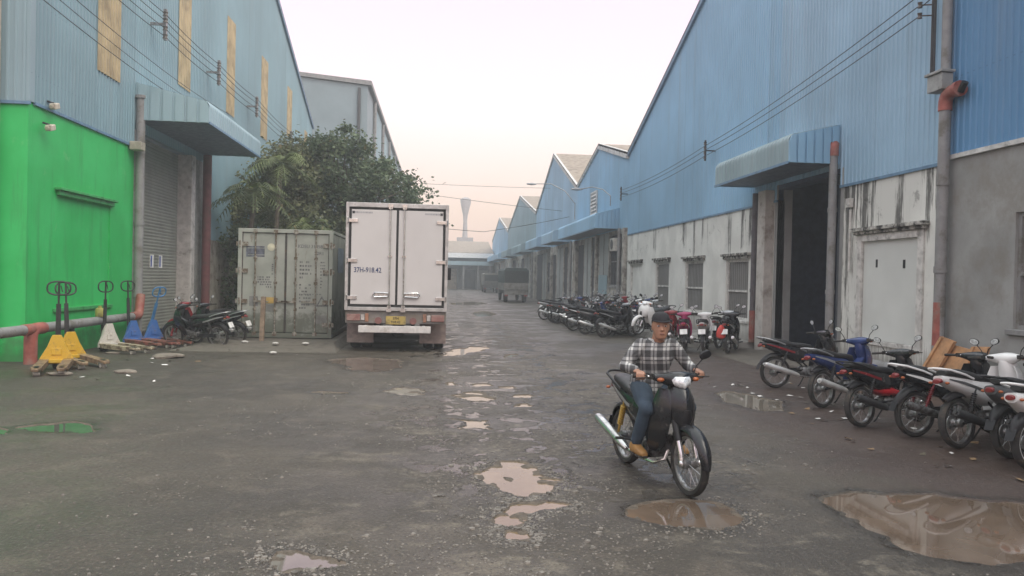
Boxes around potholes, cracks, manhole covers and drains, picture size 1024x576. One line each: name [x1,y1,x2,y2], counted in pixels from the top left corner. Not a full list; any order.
pothole [443,418,494,431]
pothole [473,460,564,497]
pothole [442,346,490,356]
pothole [268,550,346,574]
pothole [625,499,745,531]
pothole [818,491,1024,566]
pothole [328,357,405,372]
pothole [504,530,532,542]
pothole [15,421,95,433]
pothole [716,391,784,411]
pothole [490,500,574,527]
pothole [382,387,427,396]
